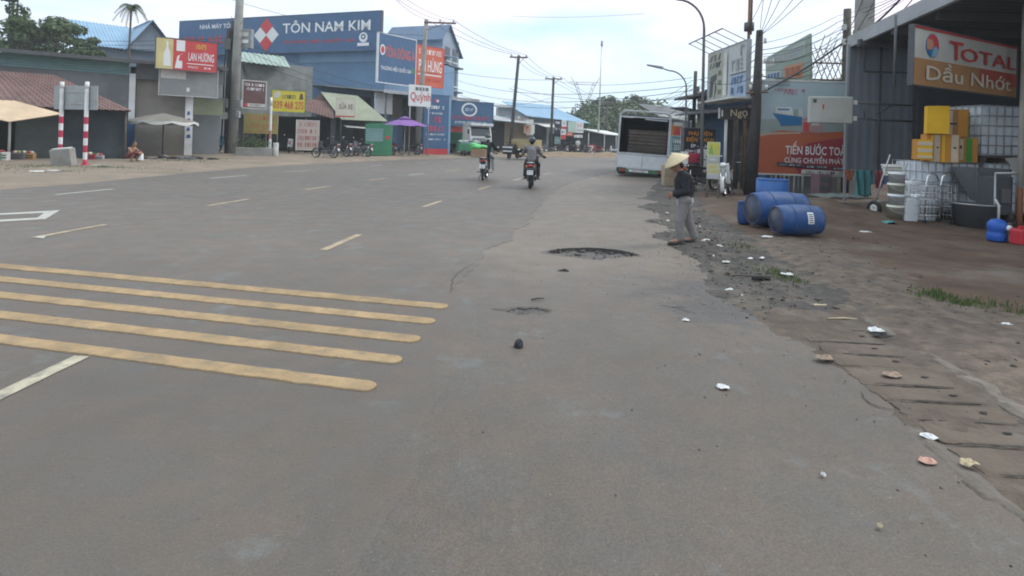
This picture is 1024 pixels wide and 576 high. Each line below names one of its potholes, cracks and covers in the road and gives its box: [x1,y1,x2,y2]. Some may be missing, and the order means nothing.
pothole [503,307,551,316]
pothole [540,247,644,260]
